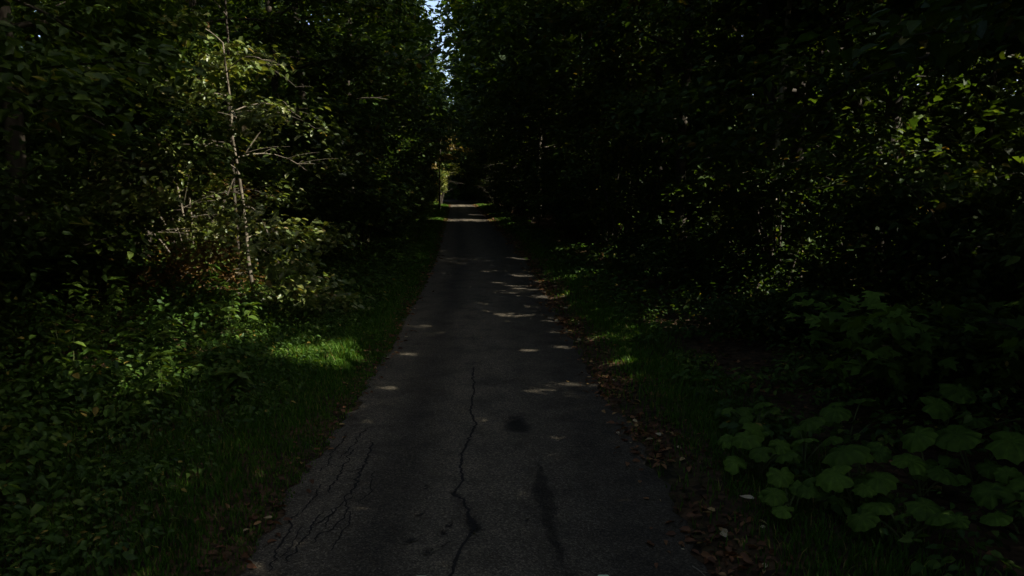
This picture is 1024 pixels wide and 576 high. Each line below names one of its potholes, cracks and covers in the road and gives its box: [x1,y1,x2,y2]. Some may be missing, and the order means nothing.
crack [268,427,375,571]
crack [440,367,477,576]
